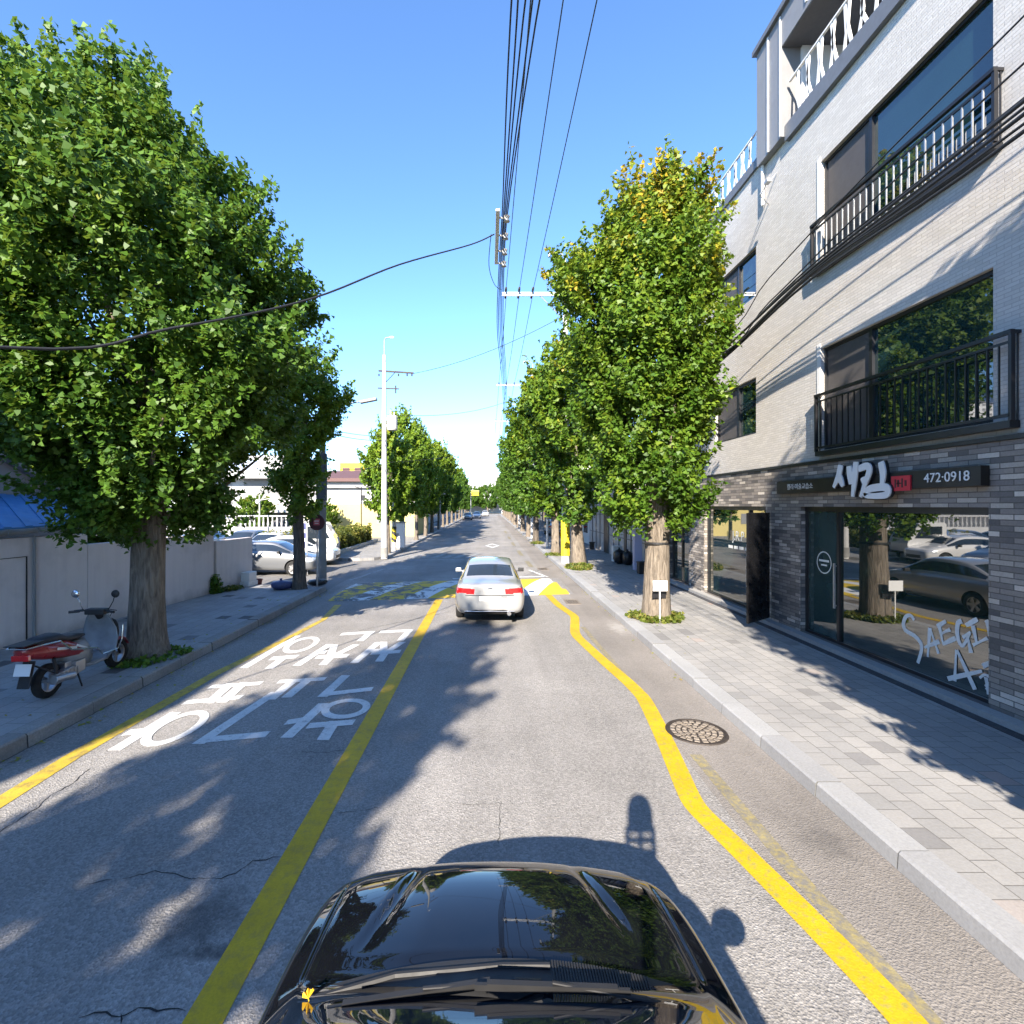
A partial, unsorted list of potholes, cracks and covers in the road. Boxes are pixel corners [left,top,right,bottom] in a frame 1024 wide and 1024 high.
crack [79,1007,183,1023]
manhole cover [665,719,729,746]
crack [83,856,279,884]
crack [1,769,89,831]
